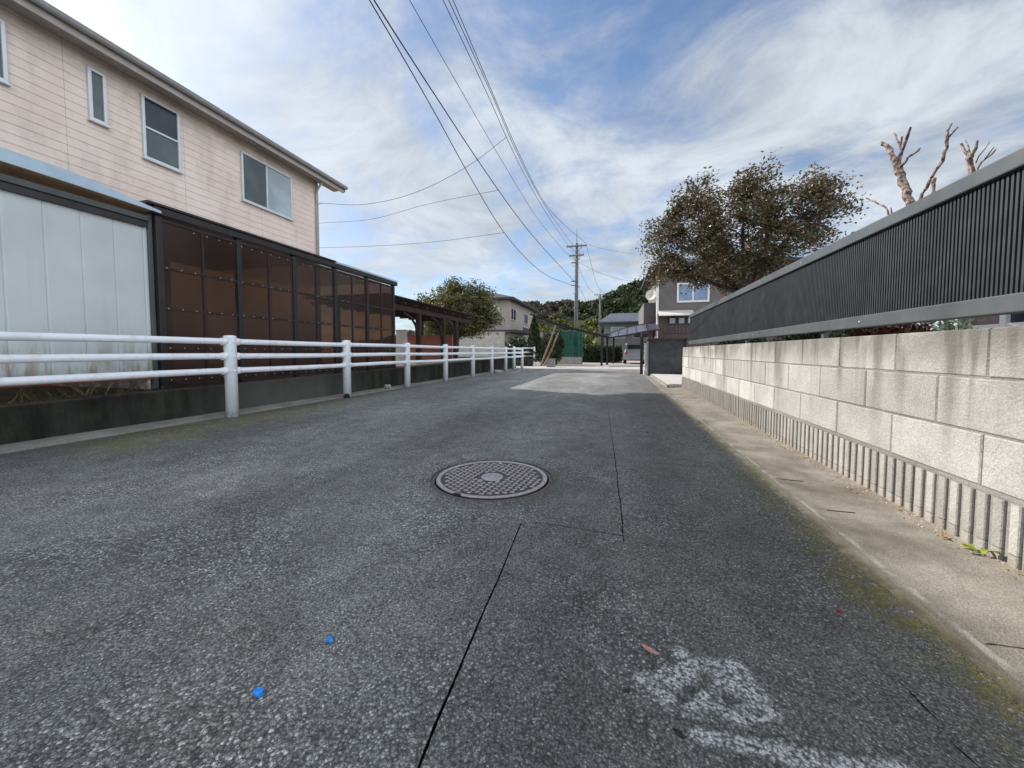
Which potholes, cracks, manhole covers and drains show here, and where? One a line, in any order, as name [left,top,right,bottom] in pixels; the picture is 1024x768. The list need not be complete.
manhole cover [430,461,553,502]
crack [898,681,939,721]
